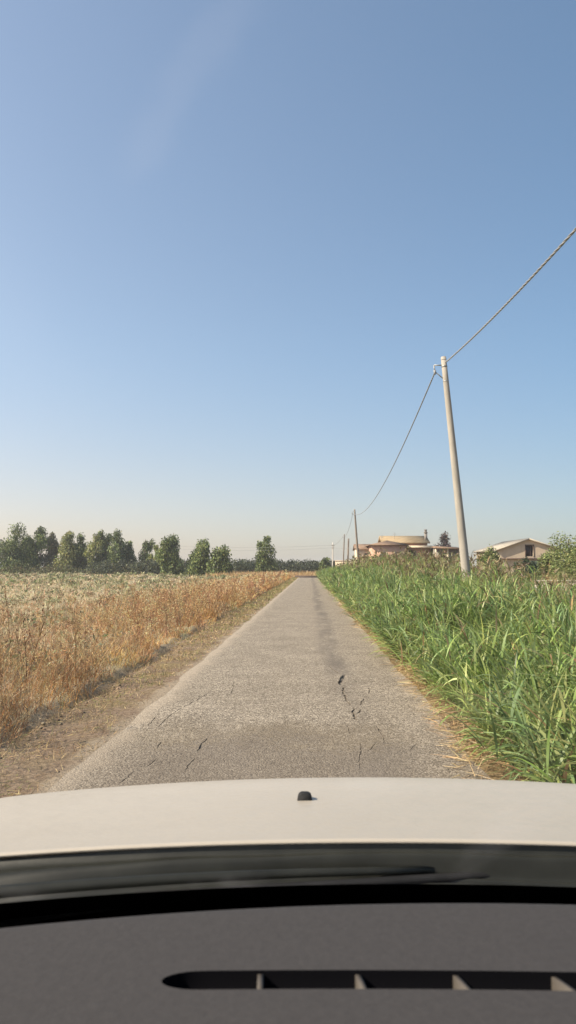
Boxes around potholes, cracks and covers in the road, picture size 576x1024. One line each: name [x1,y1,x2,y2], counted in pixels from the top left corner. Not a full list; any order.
crack [120,695,205,783]
crack [329,666,416,769]
